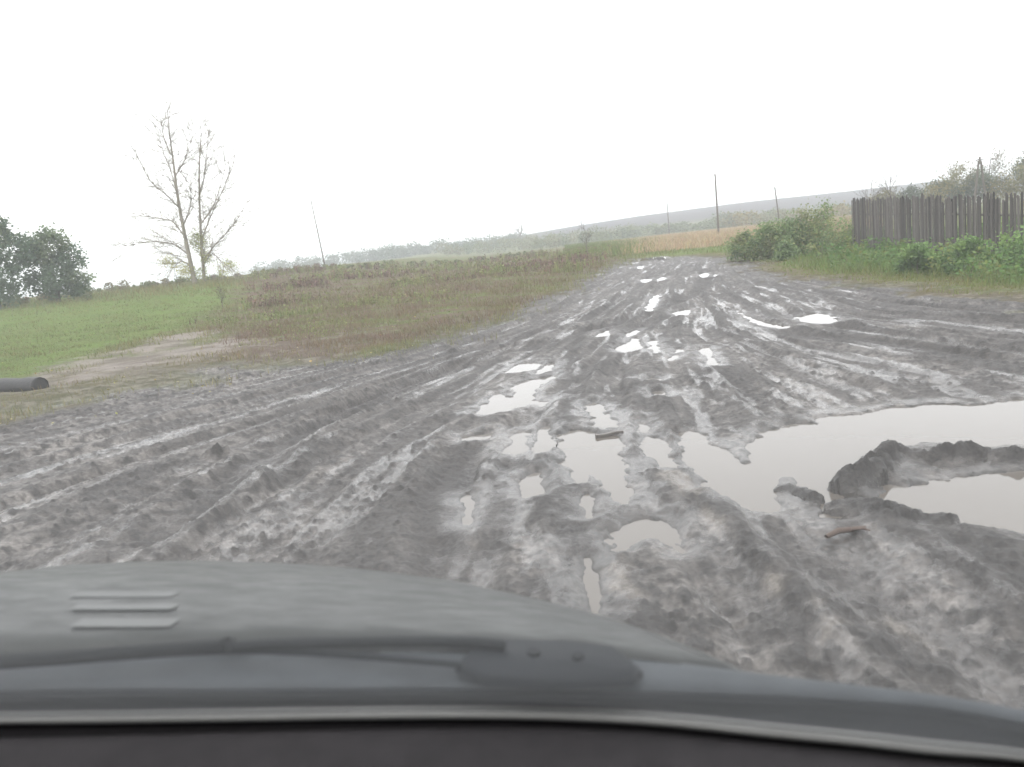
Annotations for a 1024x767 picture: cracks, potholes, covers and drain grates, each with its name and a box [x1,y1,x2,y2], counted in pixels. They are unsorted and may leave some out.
pothole [547,427,648,505]
pothole [871,467,1024,535]
pothole [668,395,1024,520]
pothole [597,513,694,555]
pothole [469,373,560,415]
